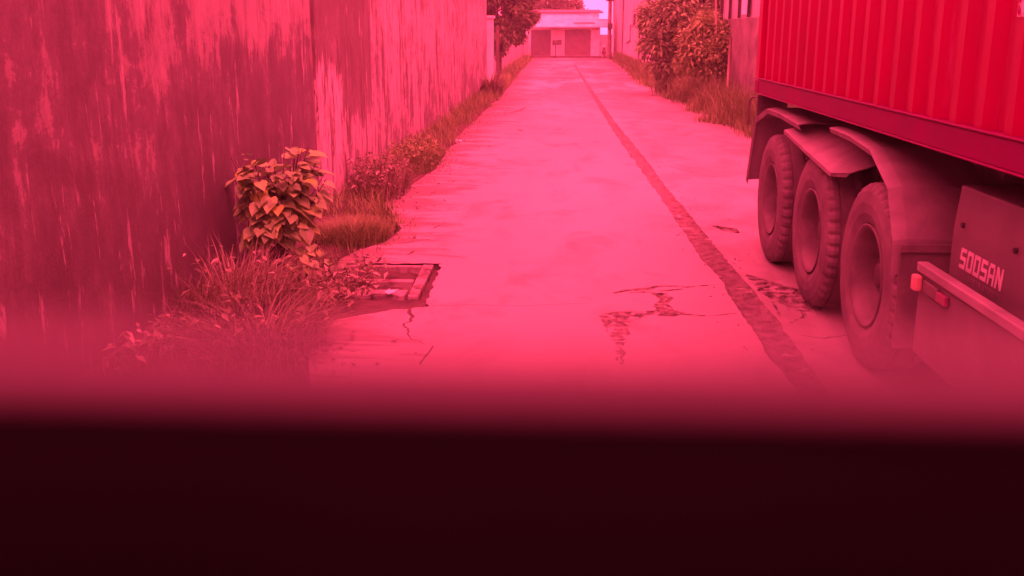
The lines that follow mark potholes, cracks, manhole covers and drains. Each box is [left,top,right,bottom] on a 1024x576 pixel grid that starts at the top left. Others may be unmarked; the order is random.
crack [402,308,422,343]
drain grate [288,263,441,323]
